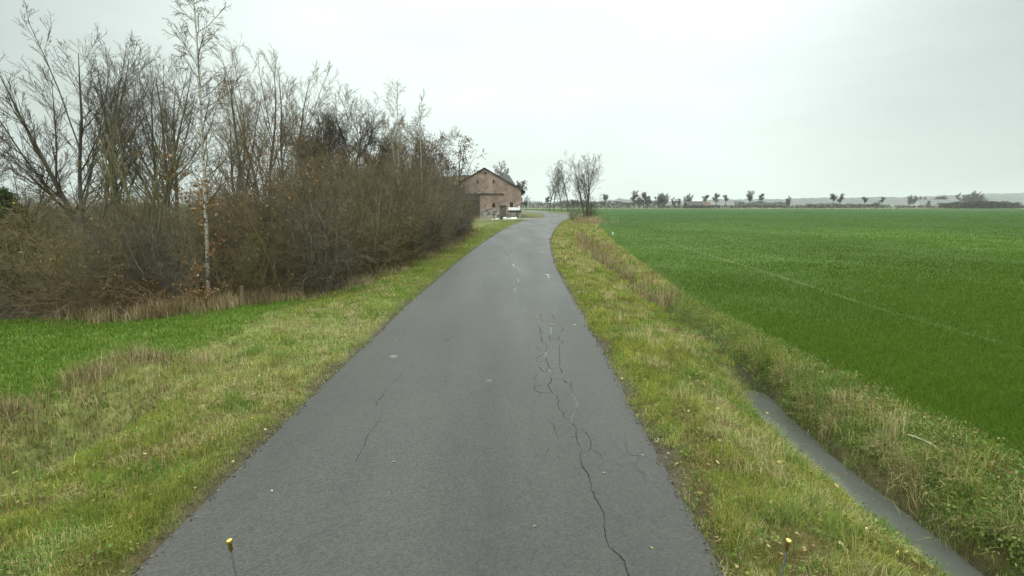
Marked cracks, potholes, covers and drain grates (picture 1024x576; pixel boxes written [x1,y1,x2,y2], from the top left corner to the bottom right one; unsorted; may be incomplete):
crack [534,313,629,576]
